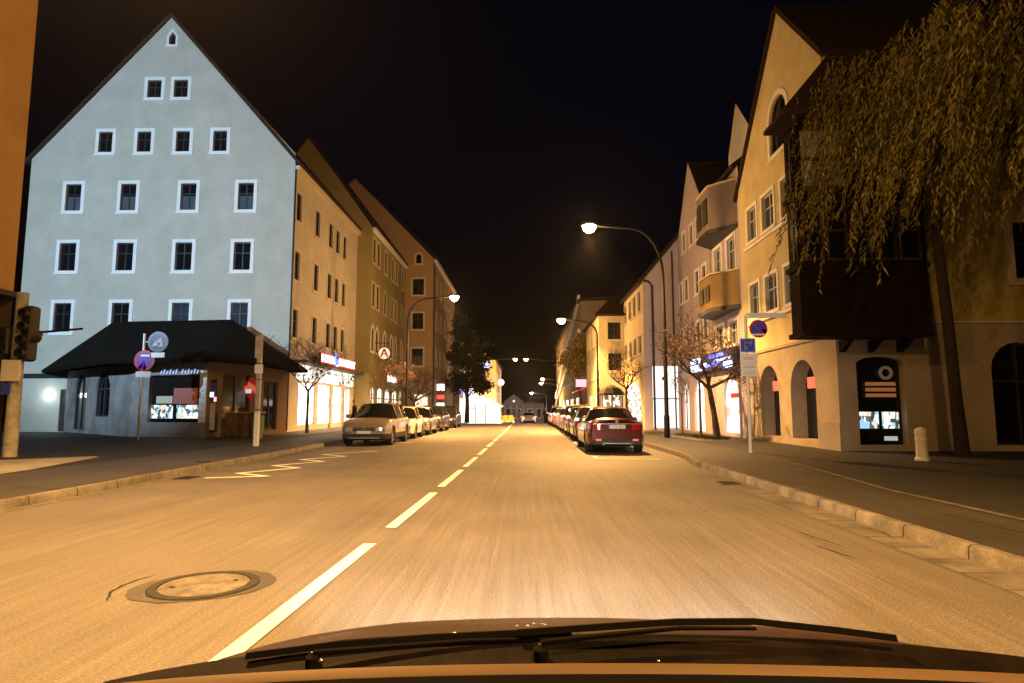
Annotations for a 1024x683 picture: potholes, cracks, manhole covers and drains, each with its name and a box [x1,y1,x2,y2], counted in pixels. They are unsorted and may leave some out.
crack [106,574,157,601]
manhole cover [145,571,260,601]
